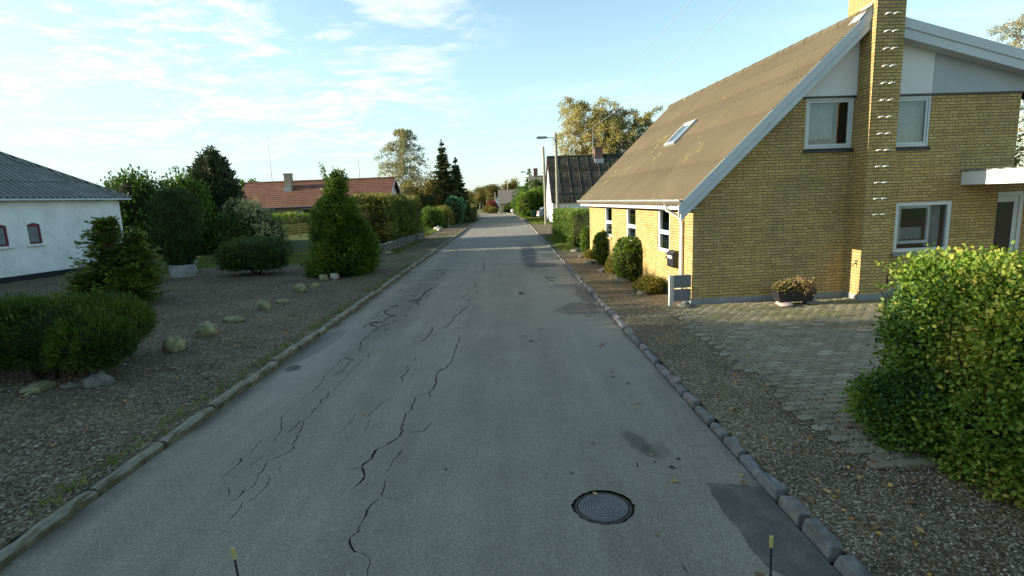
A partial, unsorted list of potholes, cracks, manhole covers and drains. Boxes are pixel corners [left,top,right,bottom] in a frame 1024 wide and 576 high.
manhole cover [571,492,635,525]
crack [313,251,488,575]
crack [194,272,445,532]
